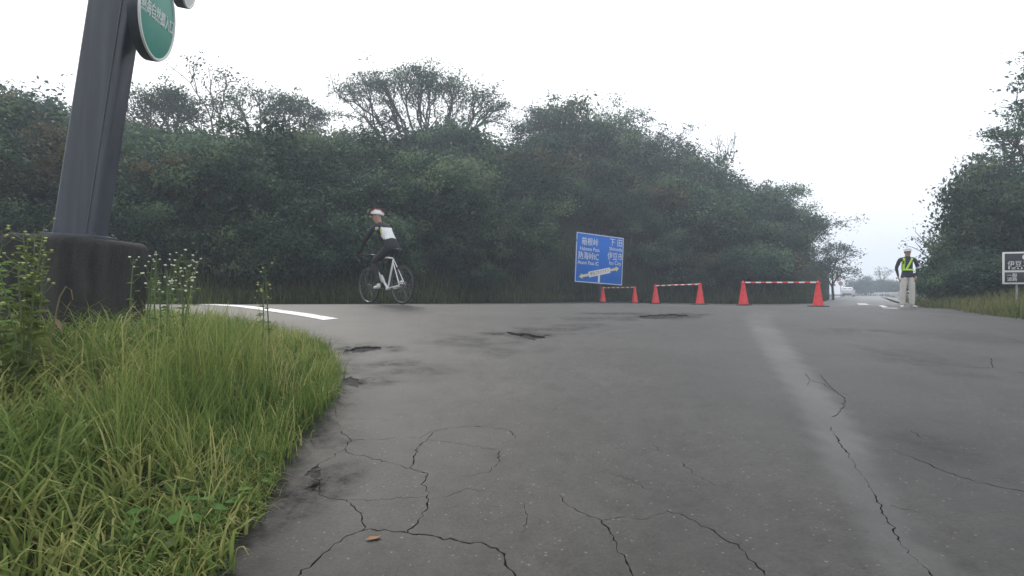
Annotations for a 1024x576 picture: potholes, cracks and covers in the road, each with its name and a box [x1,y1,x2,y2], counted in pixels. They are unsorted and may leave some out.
pothole [508,332,546,340]
crack [559,495,766,576]
pothole [342,376,362,387]
crack [806,375,933,576]
crack [298,426,528,576]
crack [900,453,1024,492]
